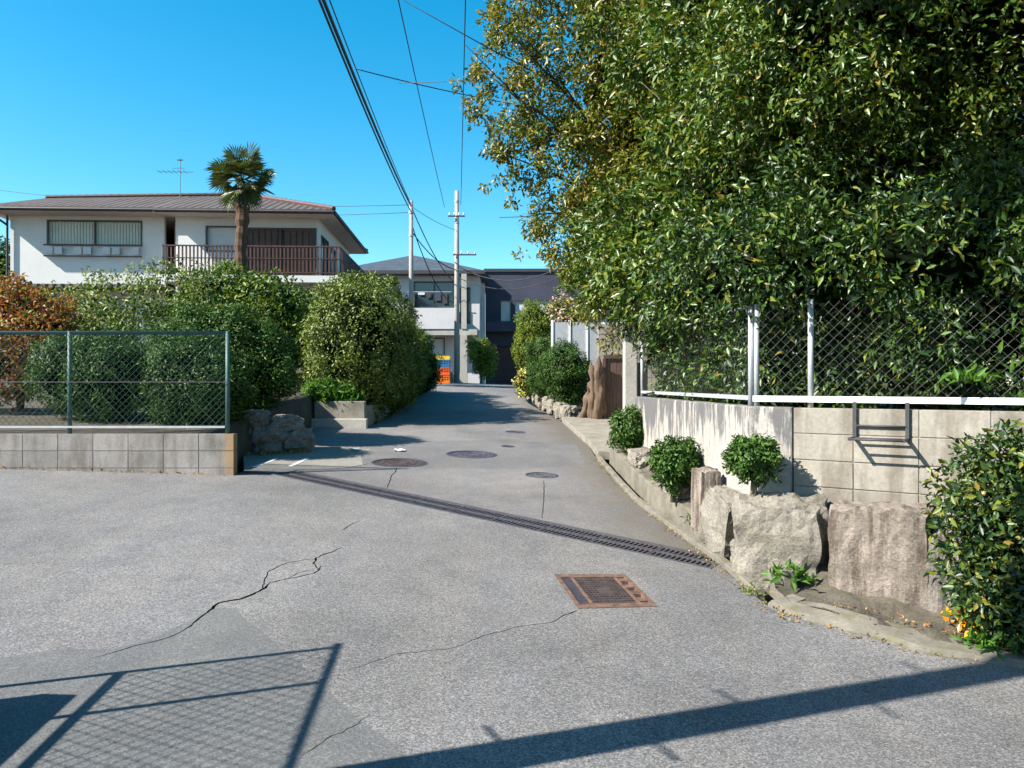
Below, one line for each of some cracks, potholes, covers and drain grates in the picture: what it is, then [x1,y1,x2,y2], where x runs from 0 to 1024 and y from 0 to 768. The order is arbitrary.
manhole cover [371,458,428,469]
crack [359,610,577,667]
manhole cover [446,450,497,458]
crack [99,547,342,657]
drain grate [273,470,719,569]
